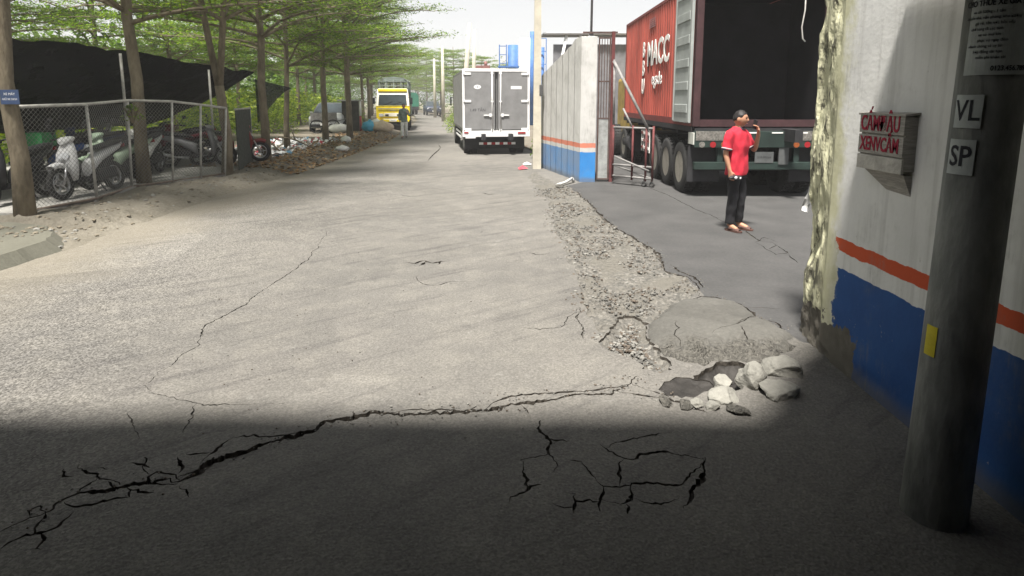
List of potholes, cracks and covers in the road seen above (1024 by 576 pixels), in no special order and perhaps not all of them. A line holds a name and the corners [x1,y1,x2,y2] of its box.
crack [578,192,786,349]
crack [407,261,456,285]
pothole [659,377,714,398]
pothole [693,361,745,391]
pothole [599,315,672,373]
crack [0,376,706,550]
